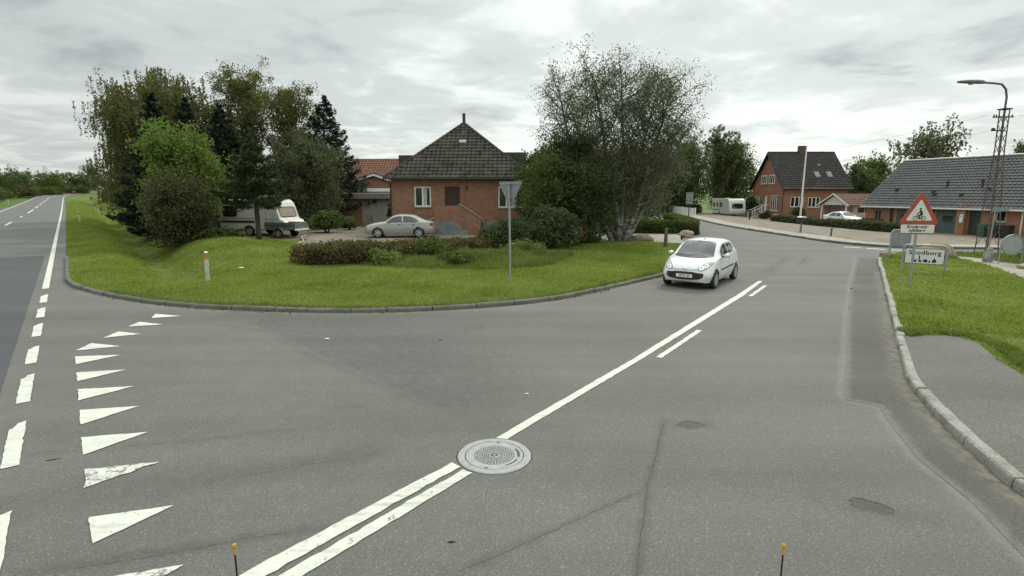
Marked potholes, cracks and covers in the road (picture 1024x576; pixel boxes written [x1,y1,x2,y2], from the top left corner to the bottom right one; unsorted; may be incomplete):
crack [460,425,664,576]
manhole cover [456,439,532,475]
pothole [848,497,895,515]
pothole [676,421,707,429]
